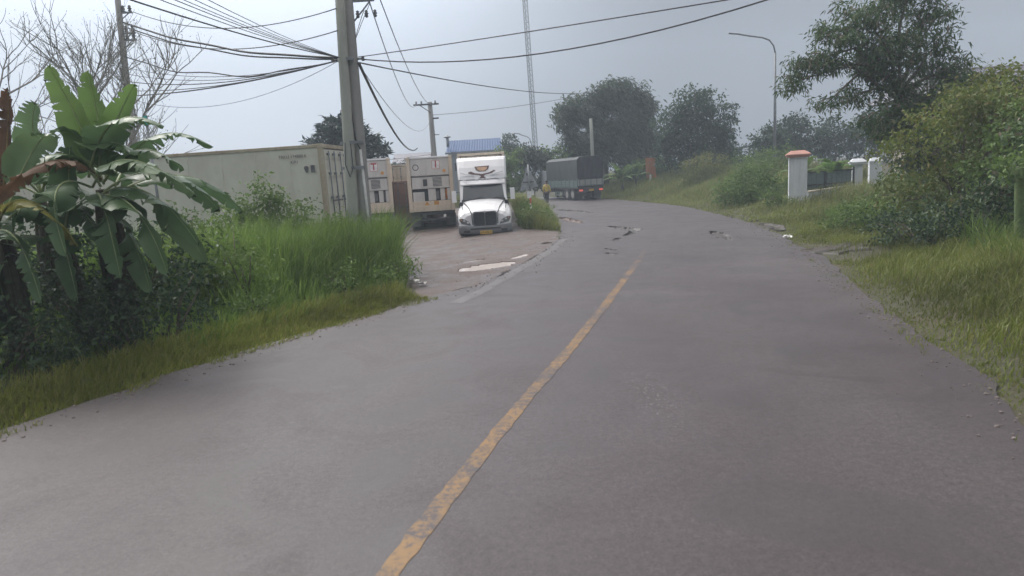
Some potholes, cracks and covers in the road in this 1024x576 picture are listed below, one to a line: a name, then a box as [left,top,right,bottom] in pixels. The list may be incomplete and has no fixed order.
pothole [607,226,644,236]
pothole [709,231,733,240]
